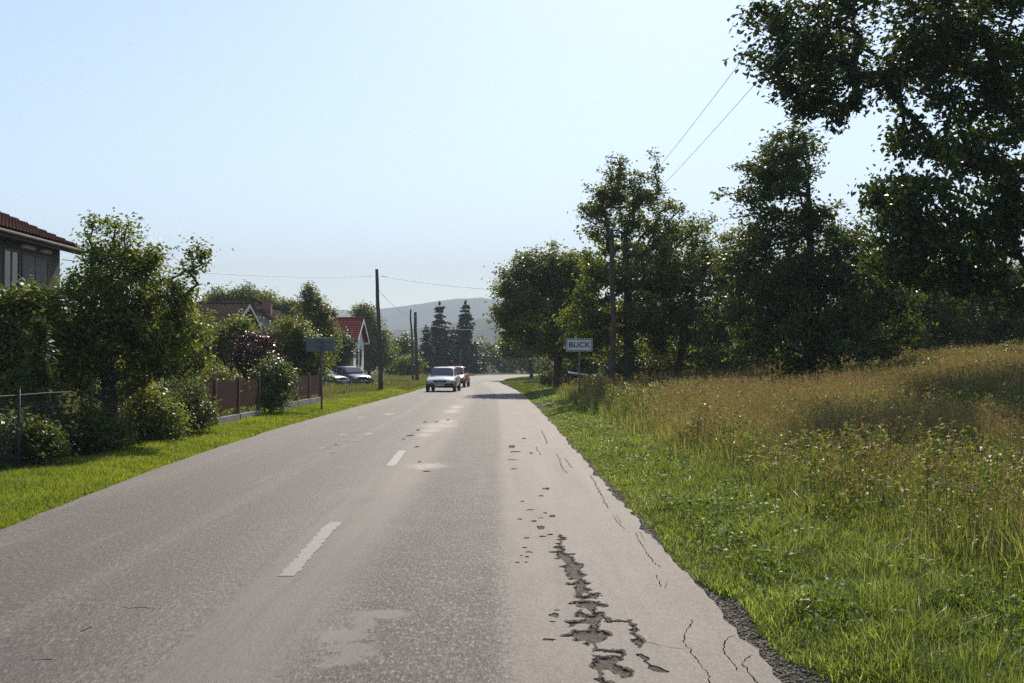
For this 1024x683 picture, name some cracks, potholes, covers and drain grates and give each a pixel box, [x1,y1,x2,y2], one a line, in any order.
crack [649,619,758,683]
crack [590,475,667,589]
pothole [548,534,646,683]
pothole [636,653,670,673]
